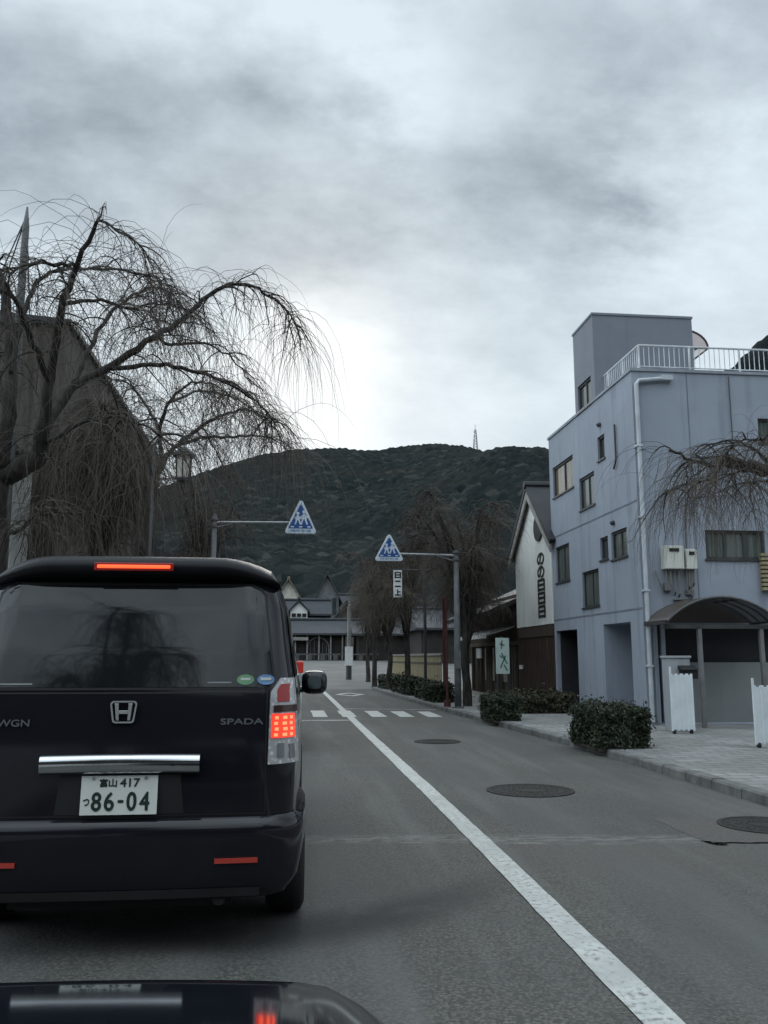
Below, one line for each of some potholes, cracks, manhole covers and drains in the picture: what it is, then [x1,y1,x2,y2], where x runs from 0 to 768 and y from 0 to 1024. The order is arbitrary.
manhole cover [486,784,575,798]
manhole cover [717,816,768,834]
